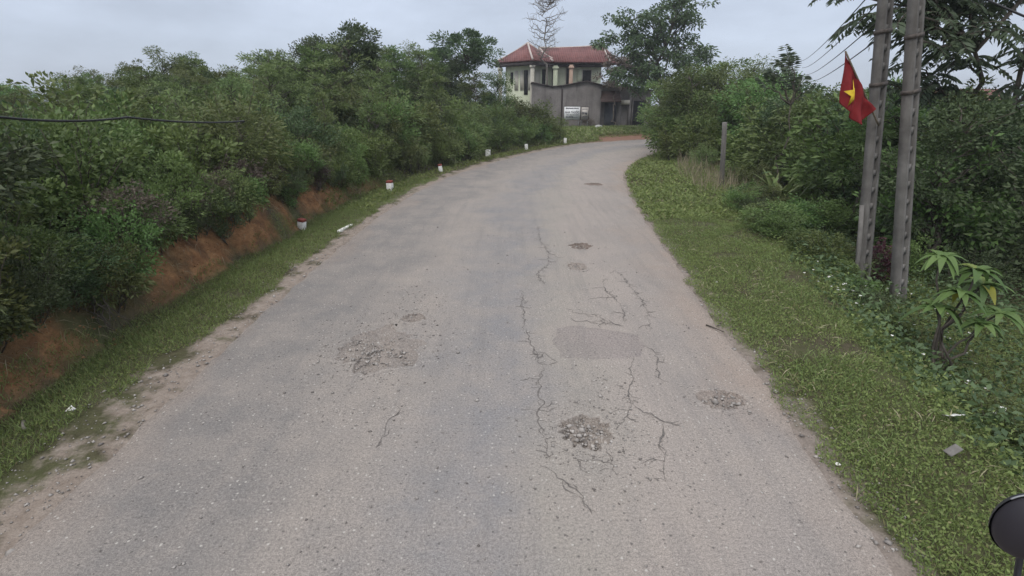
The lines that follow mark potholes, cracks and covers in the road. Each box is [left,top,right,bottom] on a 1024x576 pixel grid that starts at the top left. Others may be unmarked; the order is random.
pothole [394,311,432,325]
pothole [549,409,624,458]
pothole [328,321,433,379]
crack [533,226,561,284]
pothole [565,242,597,251]
pothole [563,261,591,272]
crack [517,290,618,513]
crack [612,348,684,481]
crack [566,271,656,329]
pothole [687,385,756,415]
